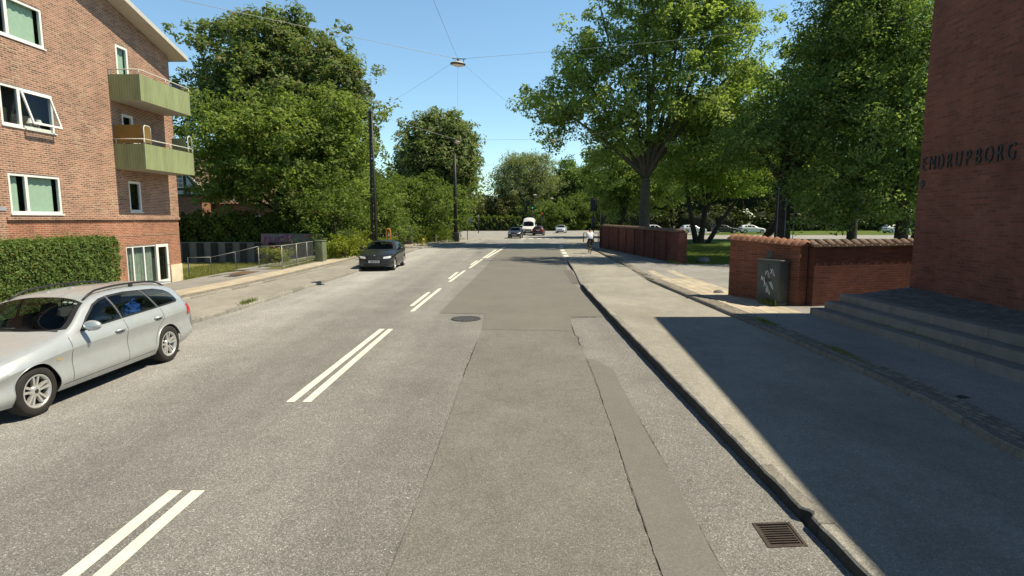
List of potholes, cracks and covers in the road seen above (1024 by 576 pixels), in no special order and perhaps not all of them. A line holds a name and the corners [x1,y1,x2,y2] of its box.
drain grate [752,522,808,548]
